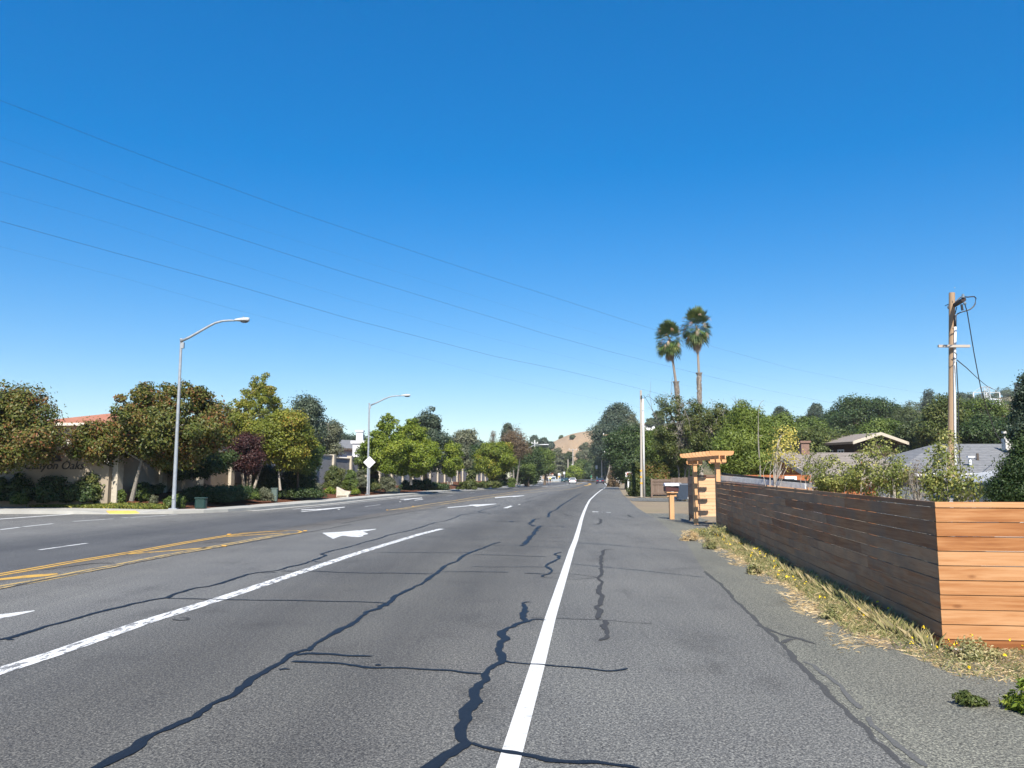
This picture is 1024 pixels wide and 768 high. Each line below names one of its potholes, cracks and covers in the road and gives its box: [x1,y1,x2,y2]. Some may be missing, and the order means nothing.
crack [0,493,928,768]
